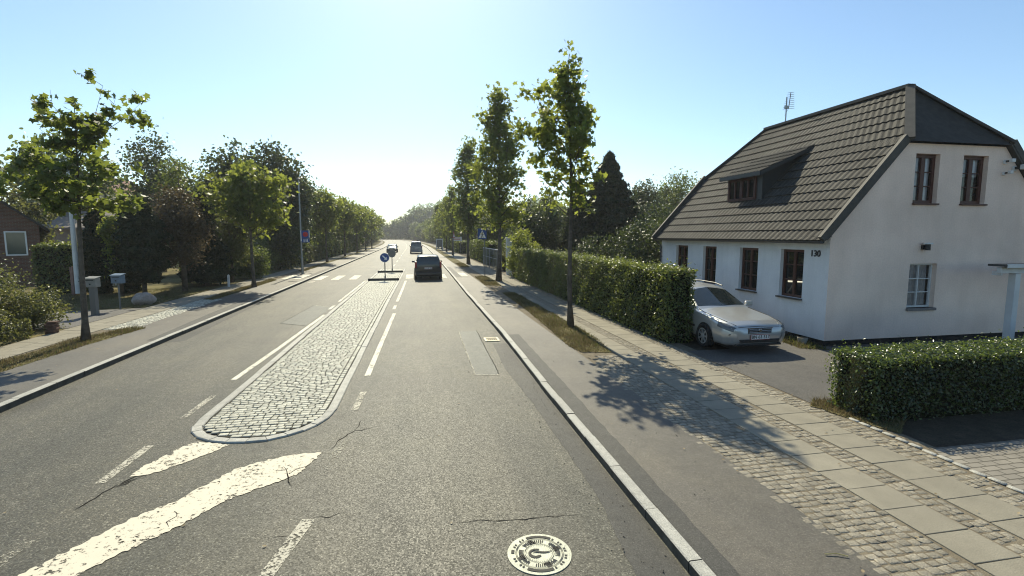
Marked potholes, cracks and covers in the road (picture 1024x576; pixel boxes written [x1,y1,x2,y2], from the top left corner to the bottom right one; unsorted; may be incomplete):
manhole cover [507,534,572,576]
crack [78,476,142,508]
